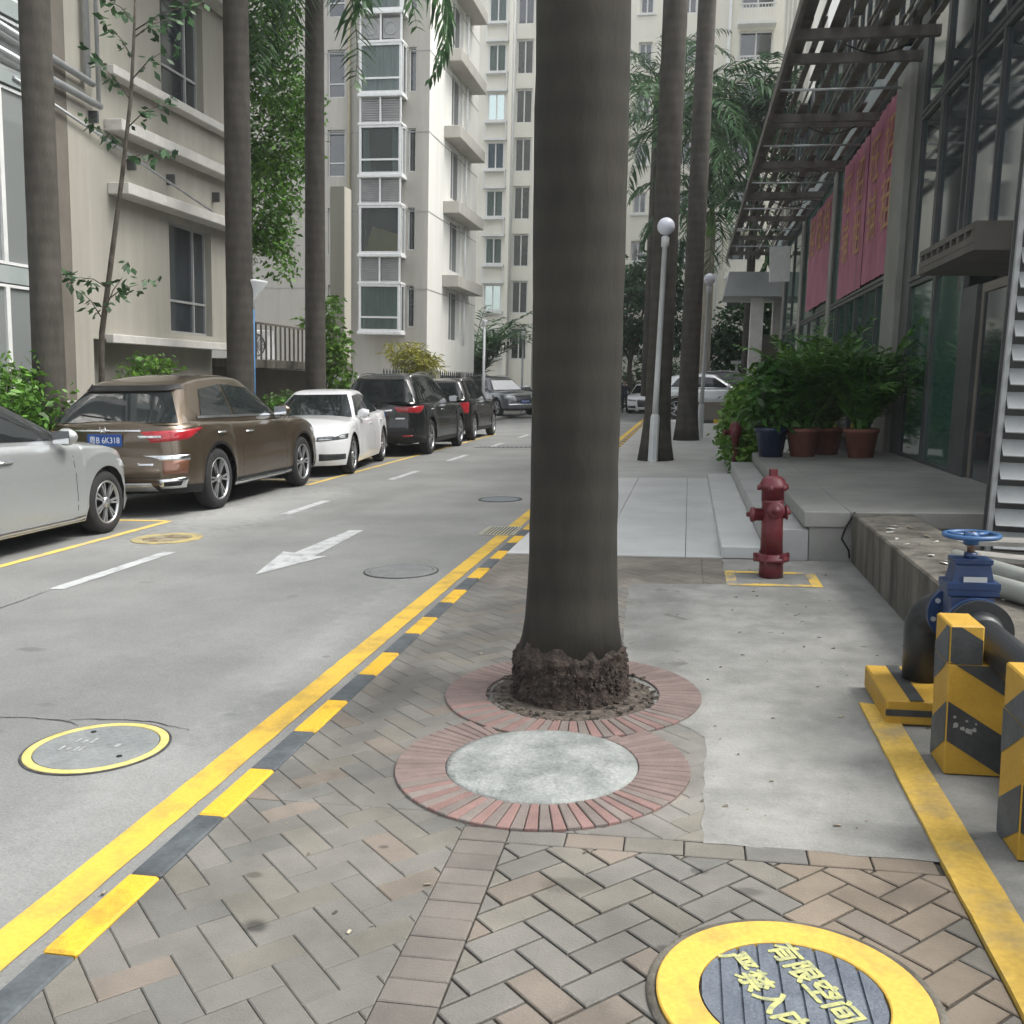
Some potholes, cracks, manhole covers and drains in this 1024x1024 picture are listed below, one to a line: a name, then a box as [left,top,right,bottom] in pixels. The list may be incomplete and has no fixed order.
crack [10,717,189,730]
manhole cover [19,722,172,775]
manhole cover [131,533,203,544]
manhole cover [646,919,950,1024]
manhole cover [363,564,439,579]
drain grate [478,526,523,536]
